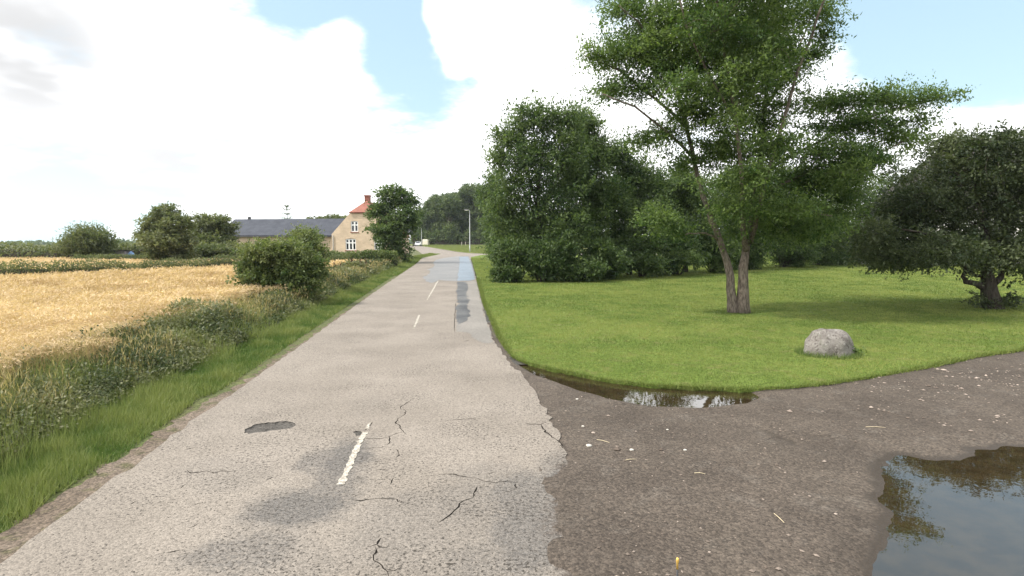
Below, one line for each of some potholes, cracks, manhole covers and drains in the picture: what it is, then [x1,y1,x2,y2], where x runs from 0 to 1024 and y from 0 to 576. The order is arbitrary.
pothole [244,421,296,434]
crack [425,472,517,522]
crack [369,538,397,576]
crack [351,402,408,502]
